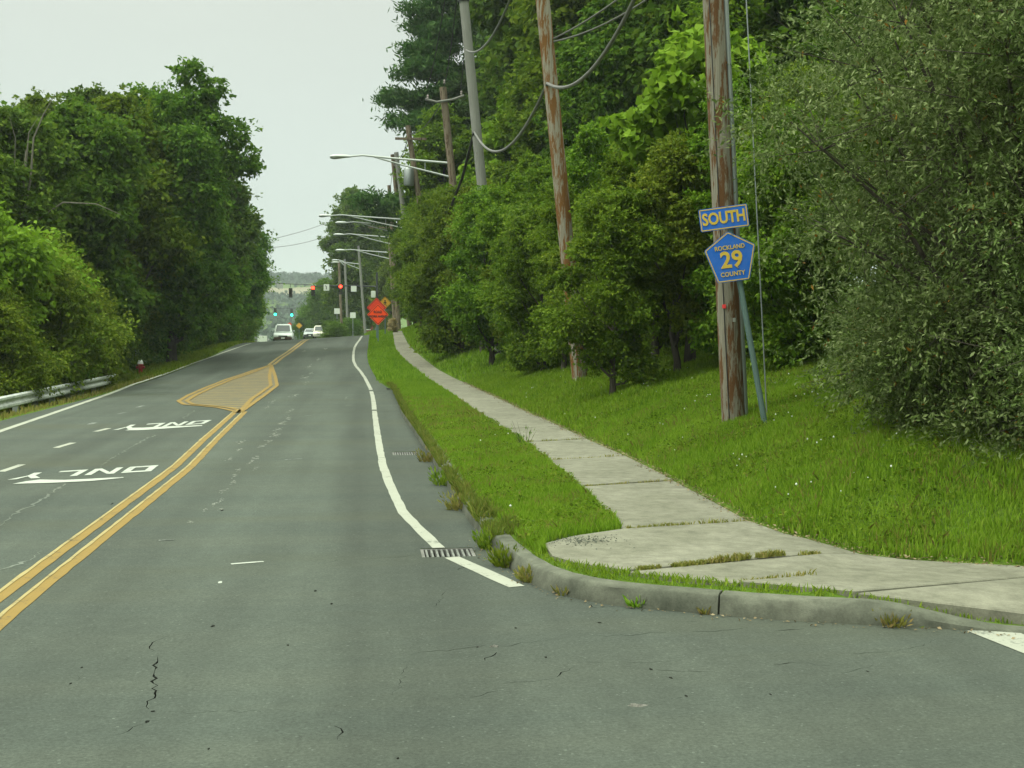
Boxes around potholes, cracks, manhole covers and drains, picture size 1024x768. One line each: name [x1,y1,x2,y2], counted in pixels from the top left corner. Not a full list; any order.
crack [146,639,251,713]
crack [0,484,66,526]
drain grate [420,548,476,557]
